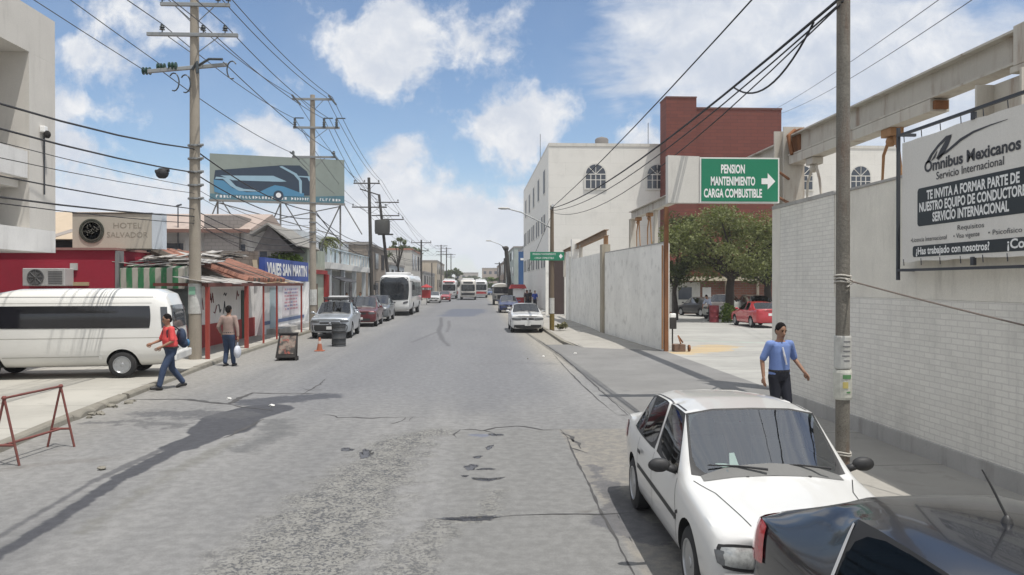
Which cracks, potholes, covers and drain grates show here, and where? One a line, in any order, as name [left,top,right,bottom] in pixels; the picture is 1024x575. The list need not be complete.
crack [452,426,635,575]
